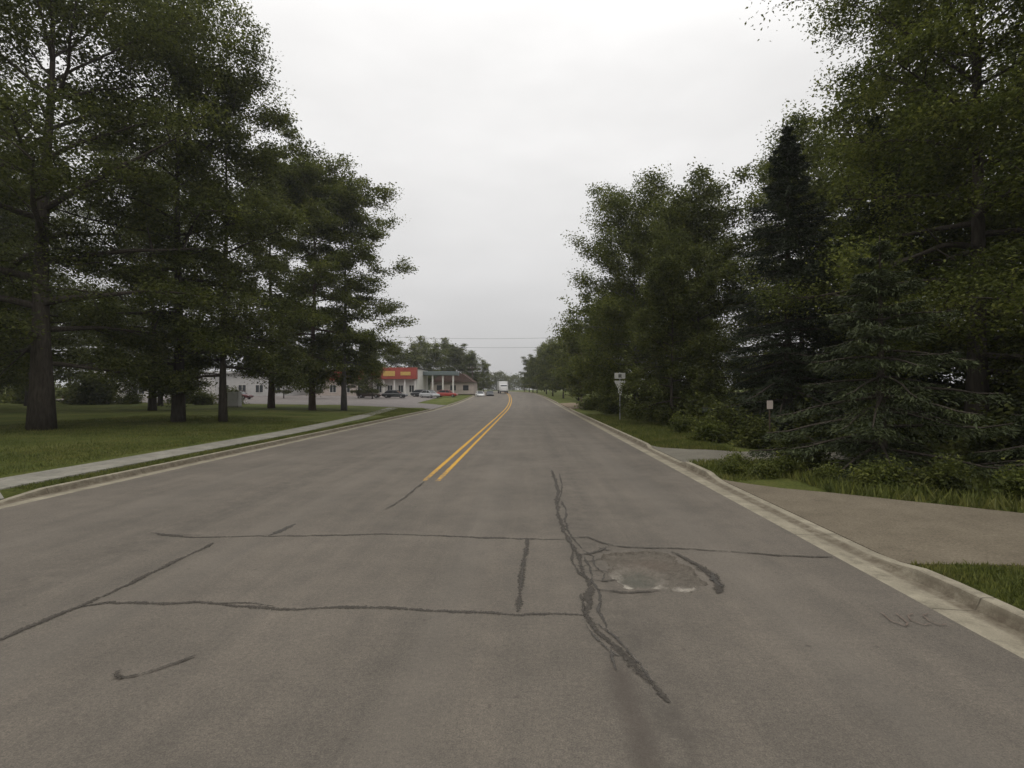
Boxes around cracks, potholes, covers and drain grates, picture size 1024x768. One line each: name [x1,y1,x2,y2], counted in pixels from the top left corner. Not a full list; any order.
pothole [601,550,709,593]
crack [0,470,828,702]
